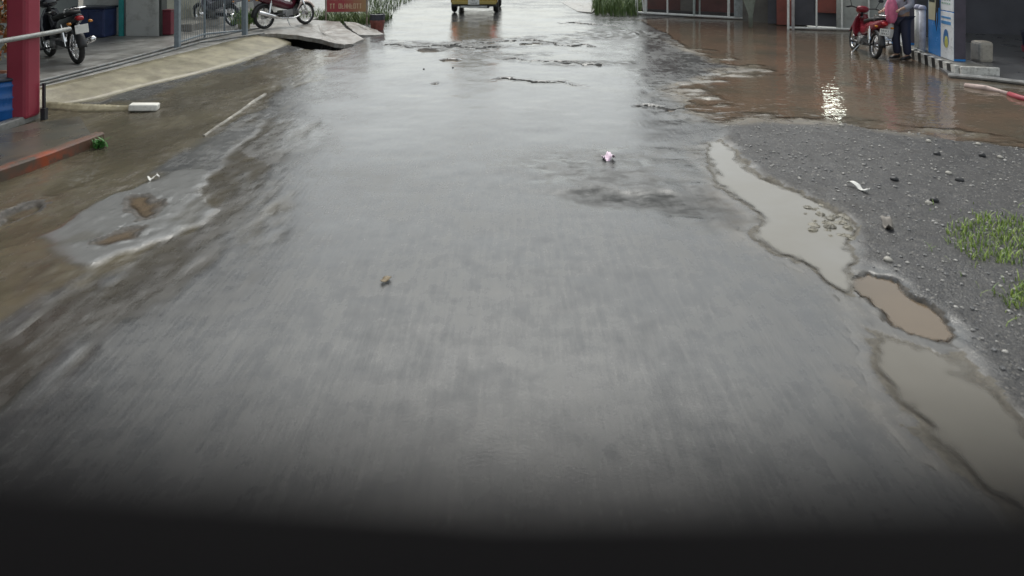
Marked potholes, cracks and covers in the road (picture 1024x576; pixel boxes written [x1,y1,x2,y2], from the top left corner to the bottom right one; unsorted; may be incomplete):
crack [633,99,720,113]
pothole [851,267,984,349]
pothole [70,222,162,251]
crack [381,22,619,89]
pothole [844,320,1024,447]
pothole [693,133,892,330]
pothole [106,188,177,225]
pothole [0,195,60,230]
